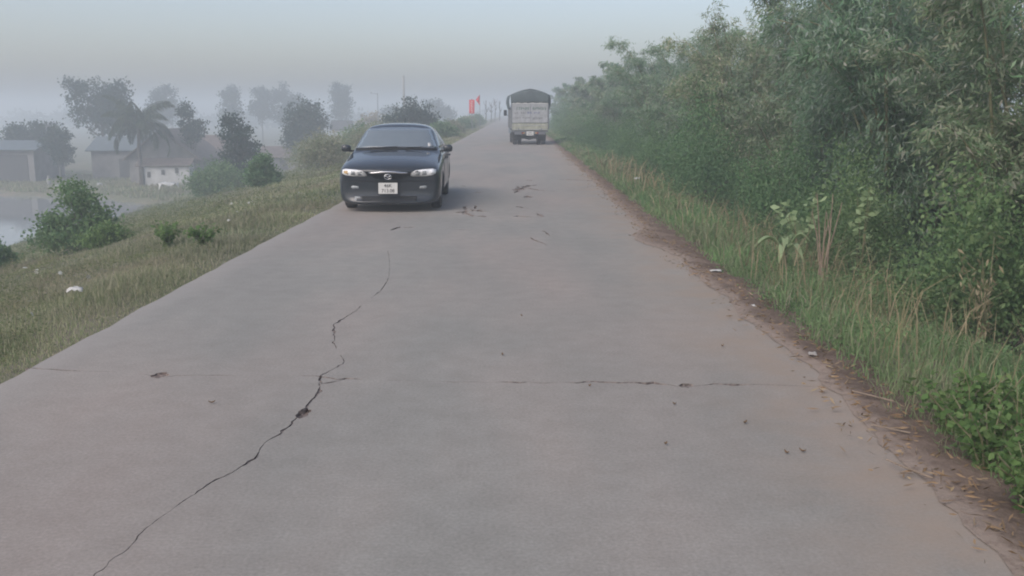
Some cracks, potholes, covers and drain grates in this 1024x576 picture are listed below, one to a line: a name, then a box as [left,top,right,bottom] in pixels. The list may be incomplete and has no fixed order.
crack [512,180,550,245]
crack [25,251,812,576]
crack [455,192,490,230]
